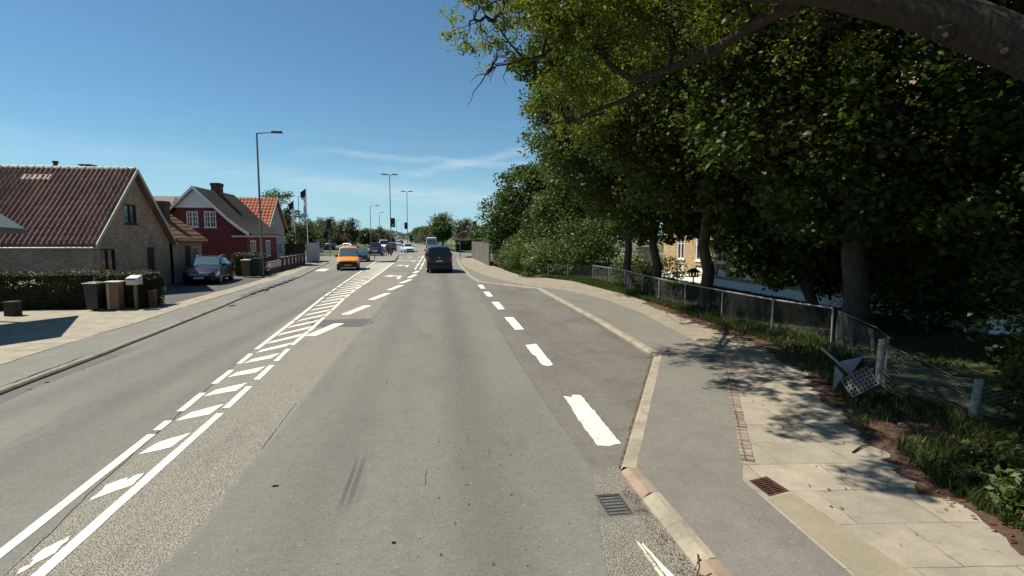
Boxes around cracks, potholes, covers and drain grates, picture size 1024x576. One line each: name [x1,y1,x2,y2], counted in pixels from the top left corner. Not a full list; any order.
drain grate [750,477,789,496]
drain grate [596,494,633,516]
